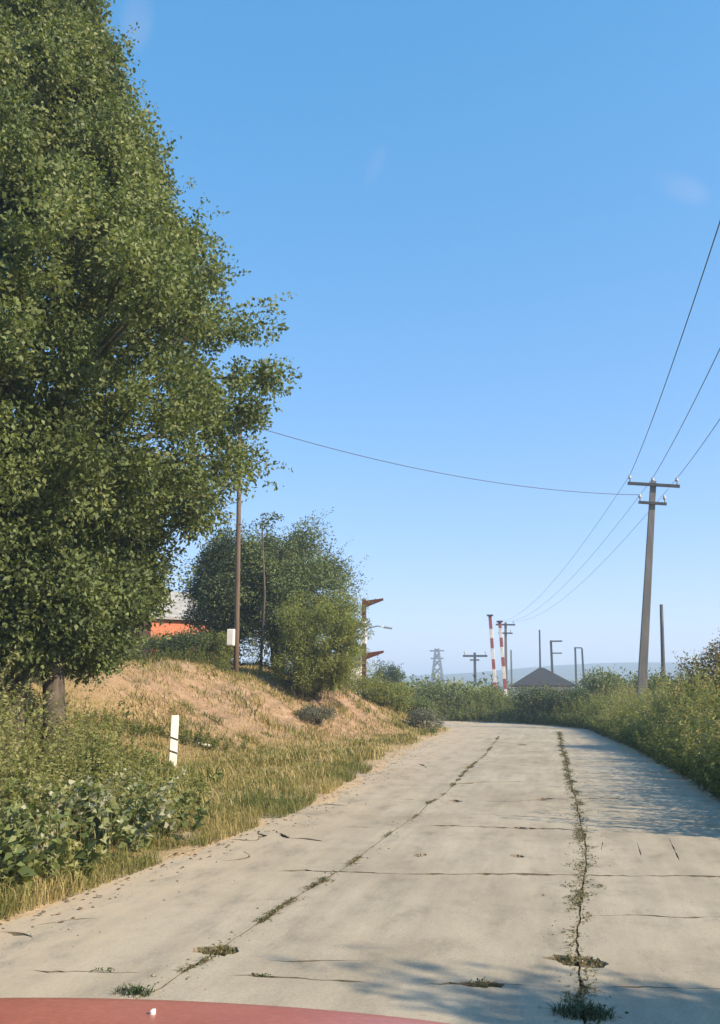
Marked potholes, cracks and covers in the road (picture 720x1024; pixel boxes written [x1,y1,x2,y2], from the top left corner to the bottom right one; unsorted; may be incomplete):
crack [136,743,720,1022]
pothole [193,945,239,956]
pothole [542,954,608,971]
